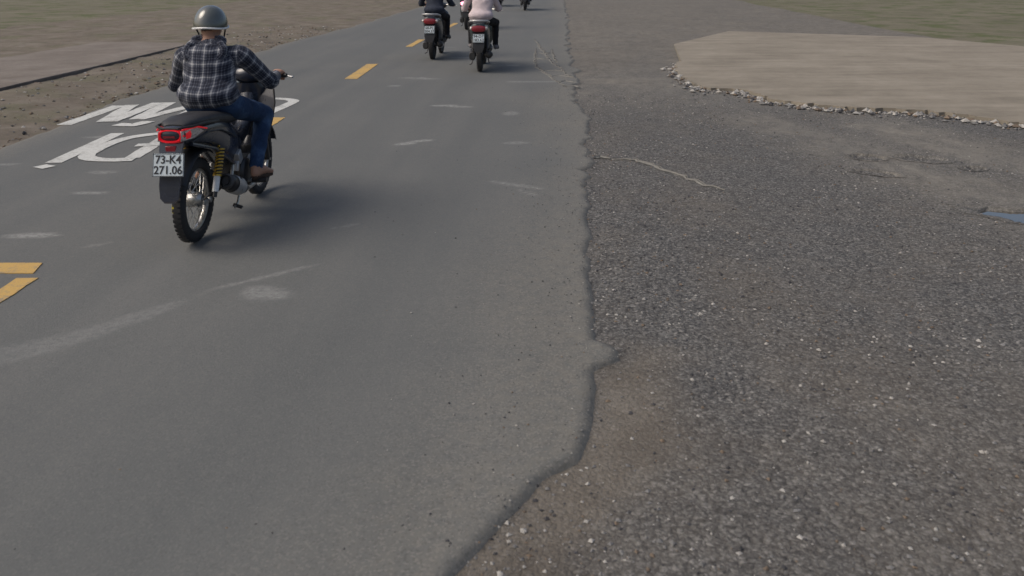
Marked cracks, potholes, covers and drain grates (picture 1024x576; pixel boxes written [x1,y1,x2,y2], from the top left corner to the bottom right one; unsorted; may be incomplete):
crack [594,155,725,190]
pothole [844,153,890,161]
pothole [845,168,907,178]
pothole [945,203,1024,224]
crack [532,39,579,87]
pothole [885,153,956,164]
